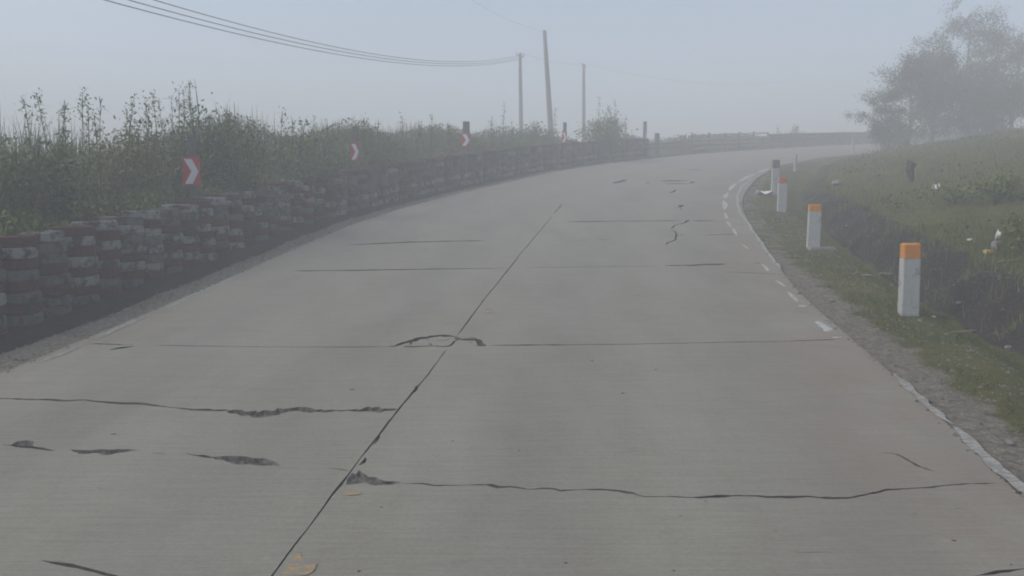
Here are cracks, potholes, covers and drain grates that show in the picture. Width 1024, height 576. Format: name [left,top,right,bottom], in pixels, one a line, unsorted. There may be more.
crack [42,560,117,576]
crack [389,335,487,347]
crack [0,398,396,418]
crack [663,180,689,245]
crack [405,453,1024,499]
